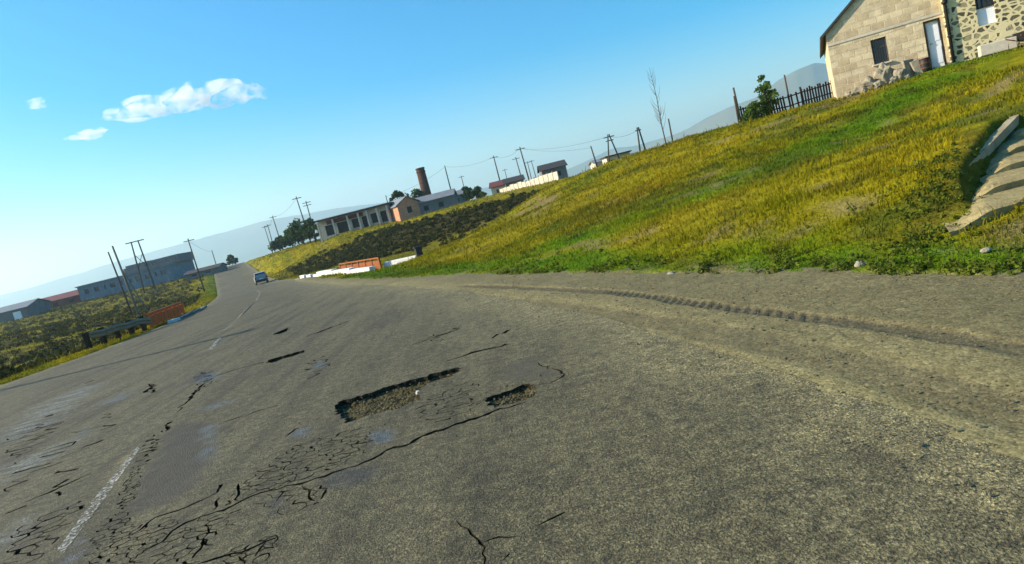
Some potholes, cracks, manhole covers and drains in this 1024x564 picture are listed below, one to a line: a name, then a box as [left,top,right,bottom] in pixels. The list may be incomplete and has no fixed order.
crack [3,414,123,564]
crack [413,325,511,361]
pothole [335,367,461,423]
crack [534,362,565,384]
pothole [266,350,306,363]
pothole [485,384,537,408]
crack [84,362,525,564]
